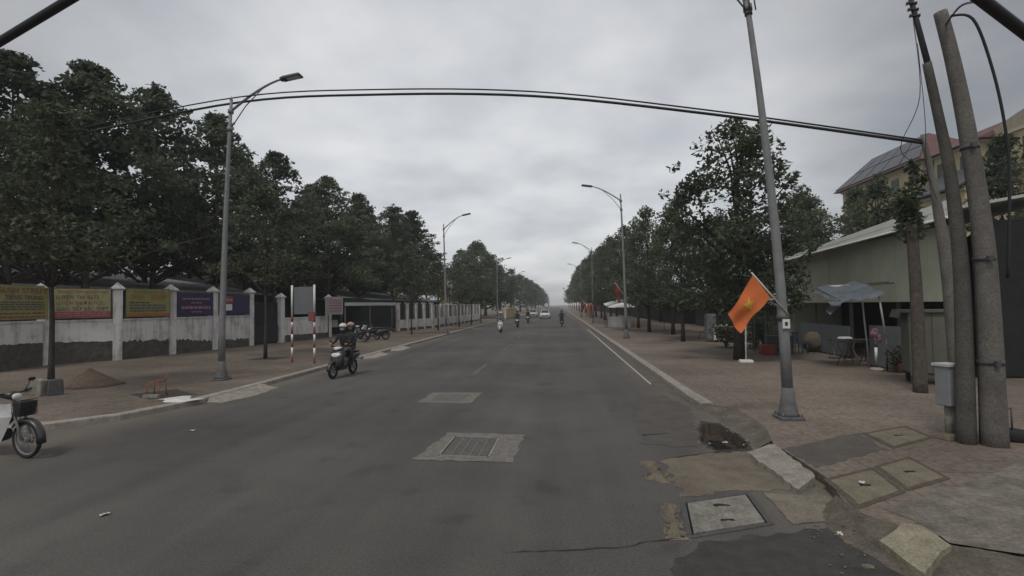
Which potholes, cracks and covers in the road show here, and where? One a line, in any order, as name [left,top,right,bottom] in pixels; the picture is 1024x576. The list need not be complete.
manhole cover [824,467,906,510]
manhole cover [680,491,774,539]
manhole cover [862,426,934,449]
manhole cover [874,456,951,492]
pothole [696,420,753,453]
